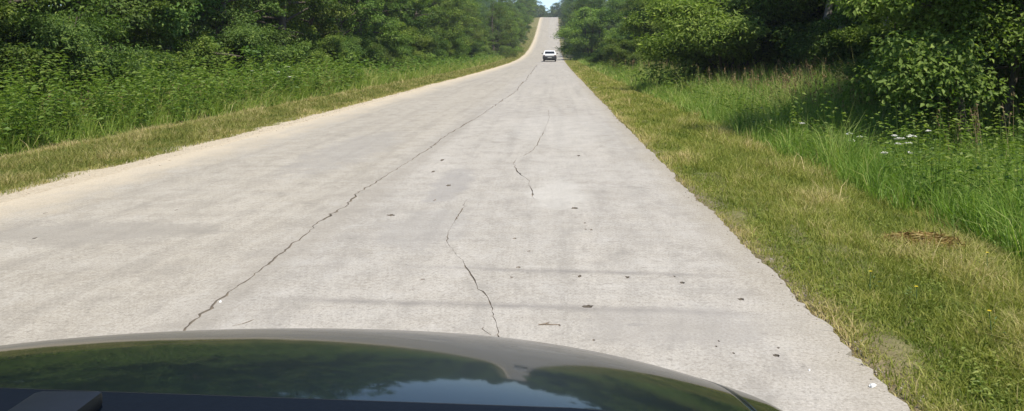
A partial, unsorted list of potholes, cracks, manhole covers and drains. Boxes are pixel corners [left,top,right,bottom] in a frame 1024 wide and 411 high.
crack [183,65,537,331]
